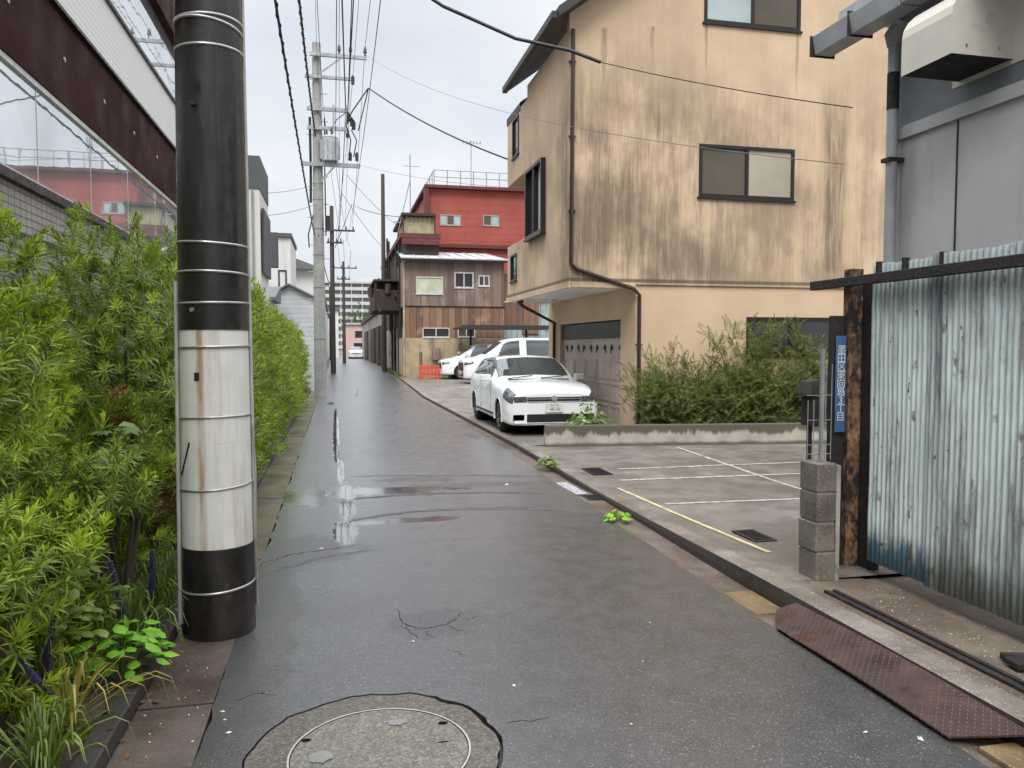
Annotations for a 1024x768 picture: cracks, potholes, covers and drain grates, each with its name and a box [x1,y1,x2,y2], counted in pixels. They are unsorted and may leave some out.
crack [397,609,464,655]
drain grate [732,529,777,542]
manhole cover [242,692,503,768]
drain grate [581,467,613,475]
